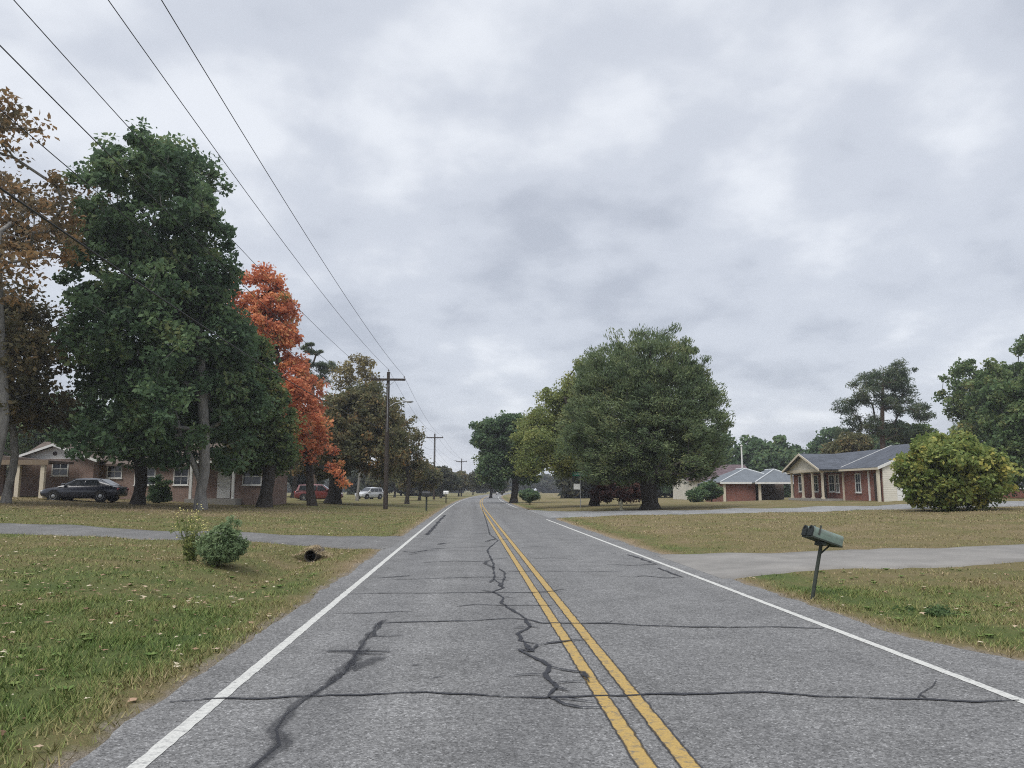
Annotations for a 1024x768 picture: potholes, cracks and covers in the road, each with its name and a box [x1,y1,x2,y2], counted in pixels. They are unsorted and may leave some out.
crack [170,509,1003,768]
